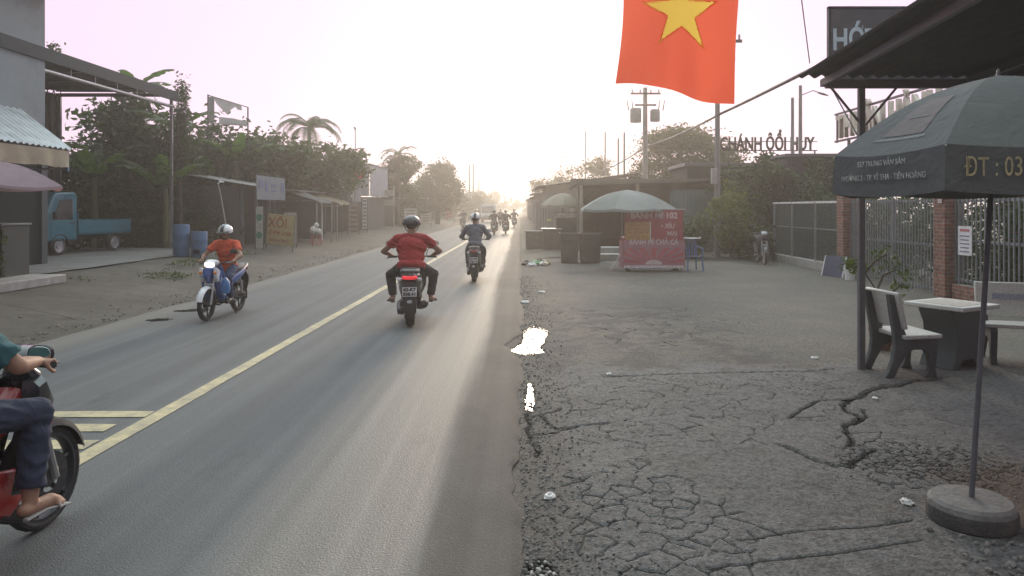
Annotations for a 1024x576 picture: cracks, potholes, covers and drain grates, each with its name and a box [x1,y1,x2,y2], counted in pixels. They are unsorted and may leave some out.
crack [525,369,1024,490]
crack [531,458,922,576]
crack [561,307,744,346]
